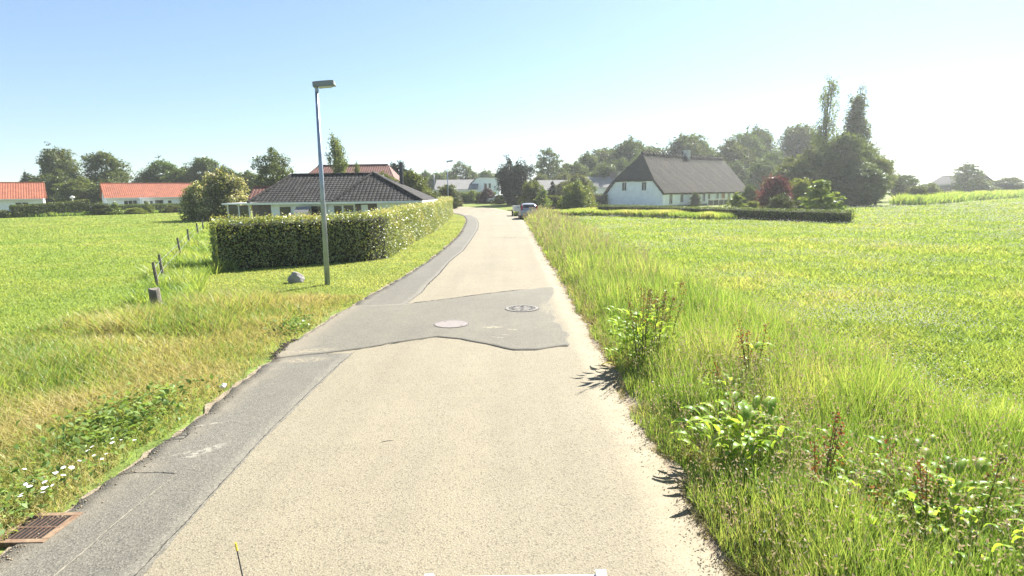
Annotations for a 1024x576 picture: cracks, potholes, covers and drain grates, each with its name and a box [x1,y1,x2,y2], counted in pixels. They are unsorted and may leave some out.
manhole cover [434,320,470,328]
drain grate [0,512,83,548]
